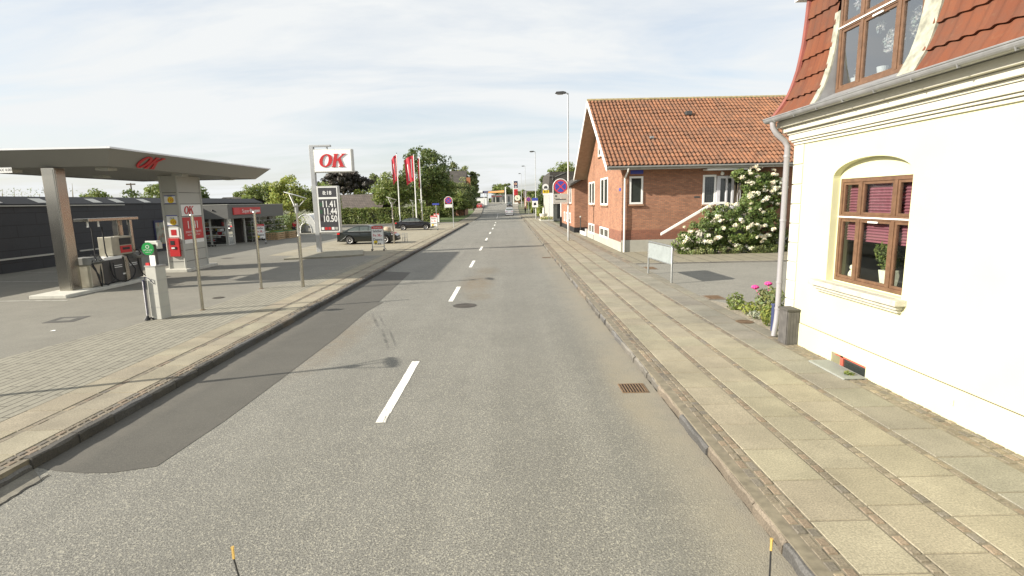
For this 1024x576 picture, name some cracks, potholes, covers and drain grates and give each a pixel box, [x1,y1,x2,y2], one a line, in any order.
drain grate [618,383,649,393]
